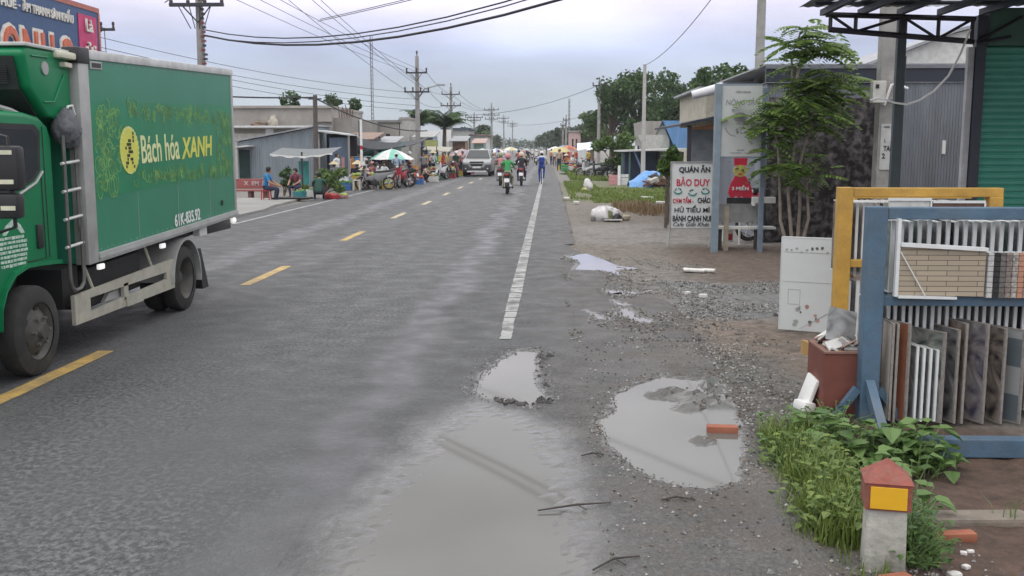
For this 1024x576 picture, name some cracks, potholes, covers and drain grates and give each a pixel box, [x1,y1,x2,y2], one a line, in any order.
pothole [595,375,748,490]
pothole [470,349,554,407]
